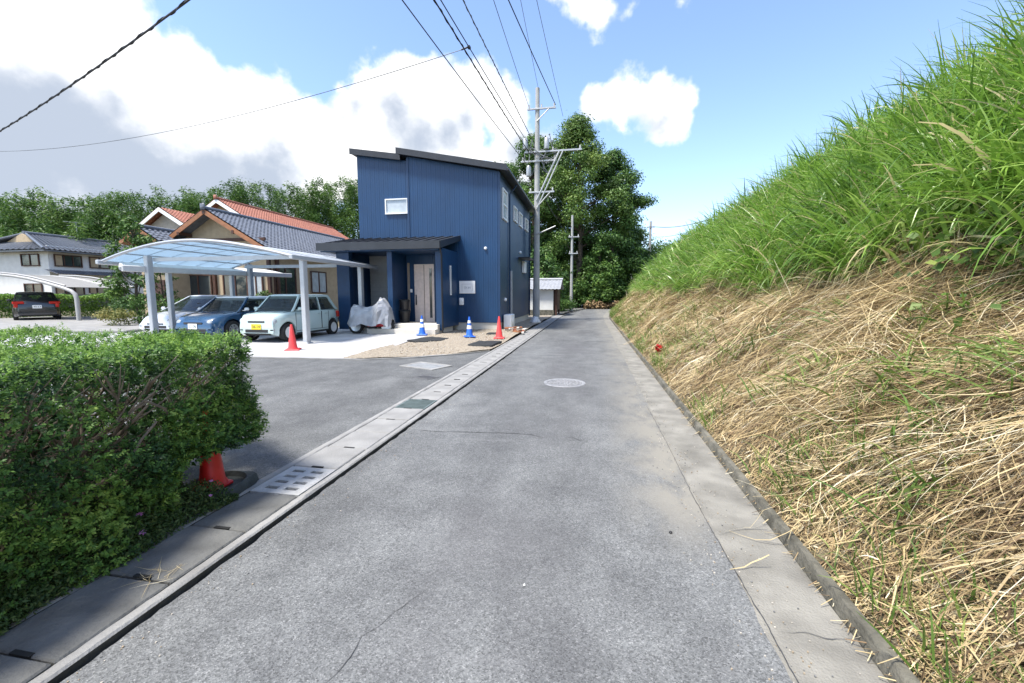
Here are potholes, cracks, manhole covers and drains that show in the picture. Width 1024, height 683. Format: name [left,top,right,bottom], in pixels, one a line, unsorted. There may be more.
crack [327,591,424,682]
utility cover [399,362,453,370]
manhole cover [544,378,586,387]
